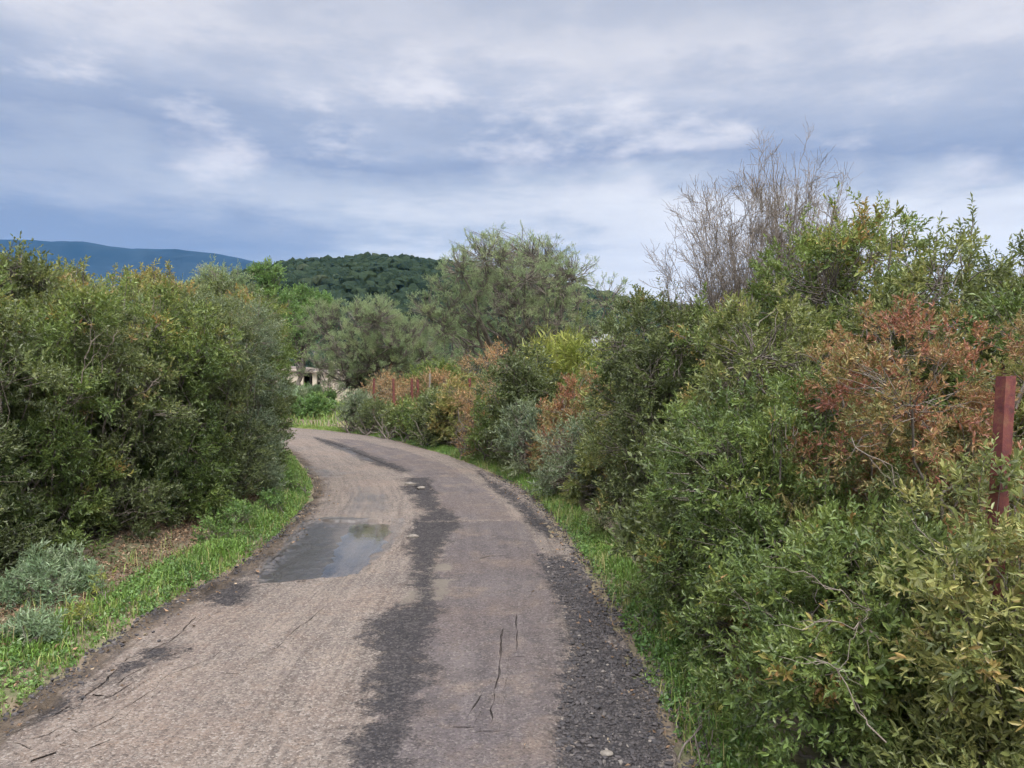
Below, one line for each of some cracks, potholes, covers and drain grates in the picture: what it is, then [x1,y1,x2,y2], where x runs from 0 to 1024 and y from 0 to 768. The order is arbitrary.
crack [453,610,526,731]
crack [0,595,388,762]
pothole [240,518,425,585]
